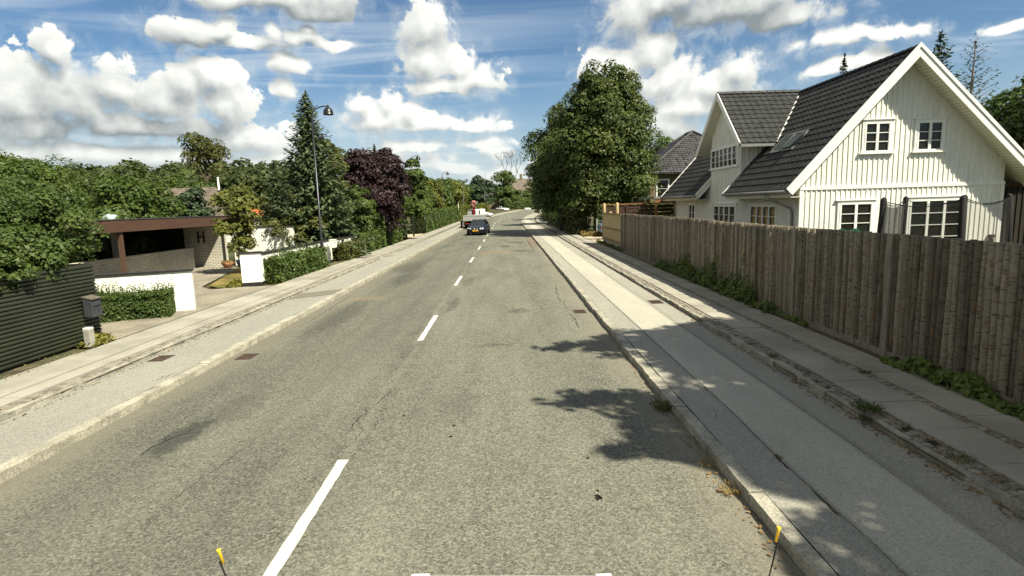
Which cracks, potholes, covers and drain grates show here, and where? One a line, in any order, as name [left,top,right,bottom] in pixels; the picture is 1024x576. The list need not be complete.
crack [340,367,401,448]
